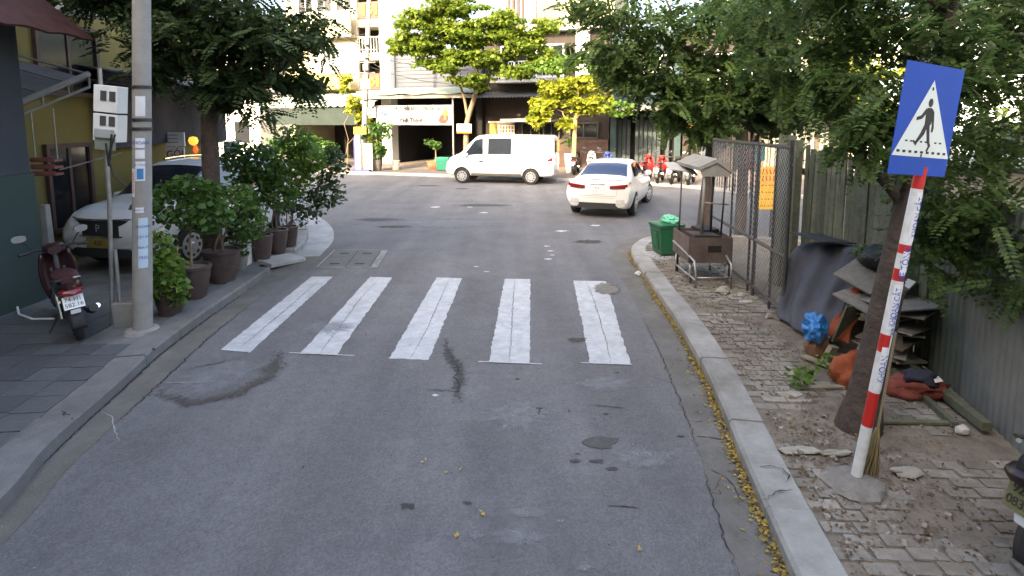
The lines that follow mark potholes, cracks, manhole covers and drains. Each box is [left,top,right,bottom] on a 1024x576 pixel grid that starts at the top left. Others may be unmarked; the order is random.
manhole cover [315,250,388,268]
crack [643,322,719,447]
crack [705,470,740,574]
